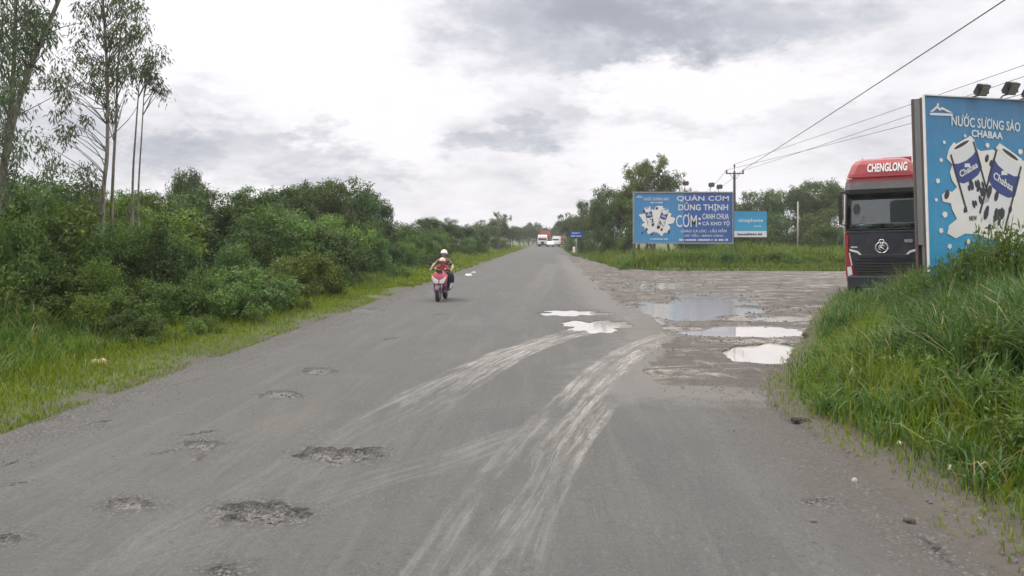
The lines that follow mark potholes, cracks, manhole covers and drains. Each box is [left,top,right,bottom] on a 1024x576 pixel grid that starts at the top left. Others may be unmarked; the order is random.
pothole [258,390,305,398]
pothole [722,342,797,365]
pothole [561,320,634,334]
pothole [104,497,155,510]
pothole [291,446,386,465]
pothole [201,563,240,576]
pothole [301,367,339,375]
pothole [213,500,314,525]
pothole [0,533,22,542]
pothole [183,439,228,451]
